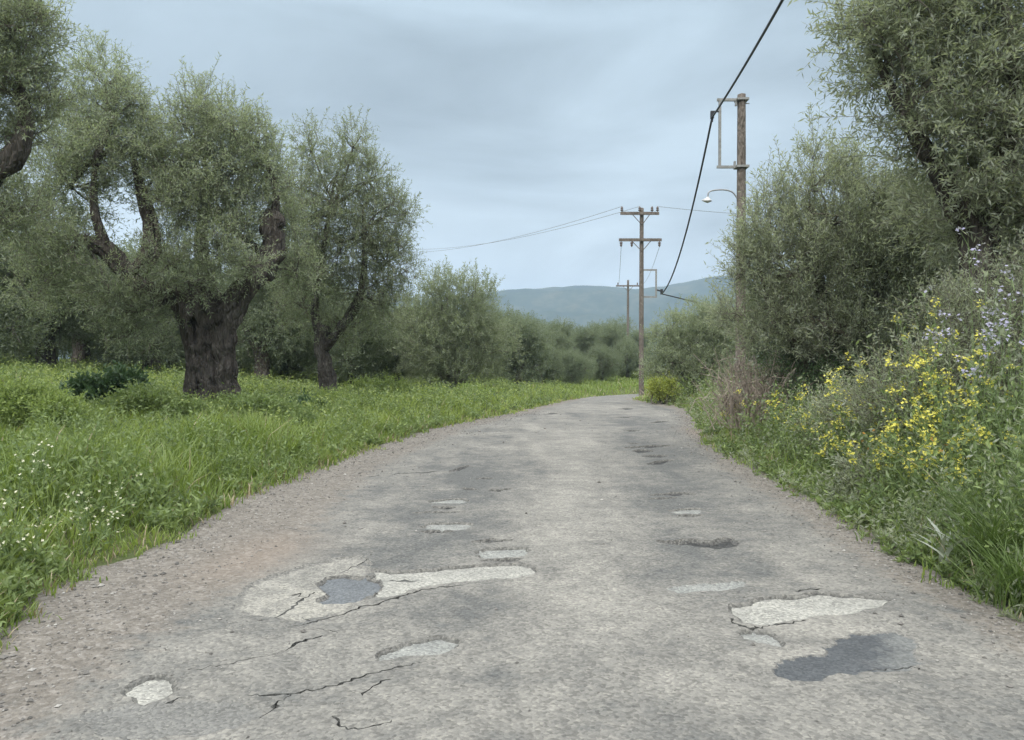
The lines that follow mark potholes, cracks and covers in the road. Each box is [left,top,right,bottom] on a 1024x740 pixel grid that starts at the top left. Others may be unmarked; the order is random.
crack [189,579,461,670]
crack [332,716,392,730]
crack [246,662,422,718]
pothole [315,575,384,605]
pothole [656,537,741,549]
